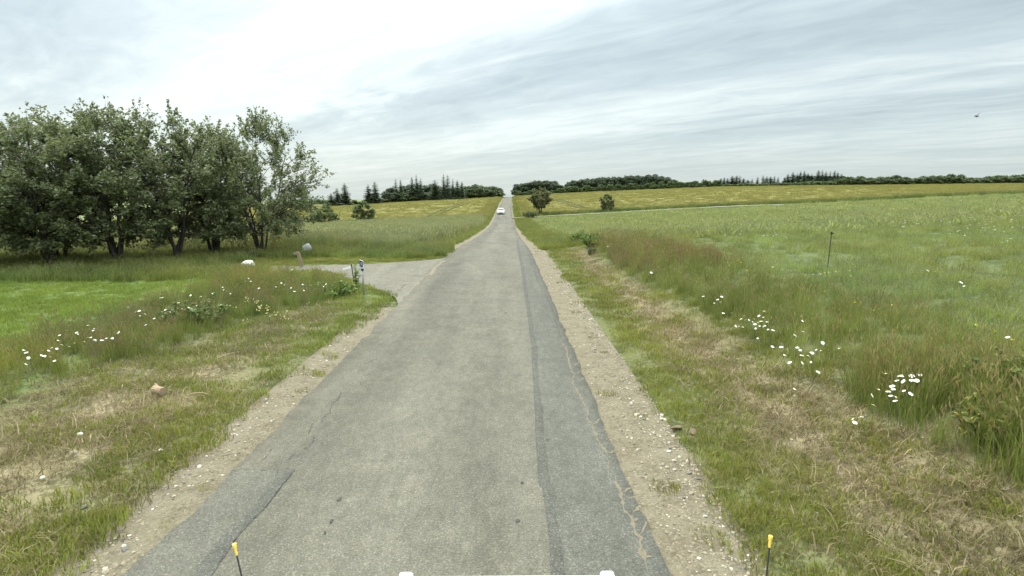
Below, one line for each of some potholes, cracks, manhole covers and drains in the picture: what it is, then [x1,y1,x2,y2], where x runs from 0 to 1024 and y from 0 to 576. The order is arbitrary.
crack [534,271,652,573]
